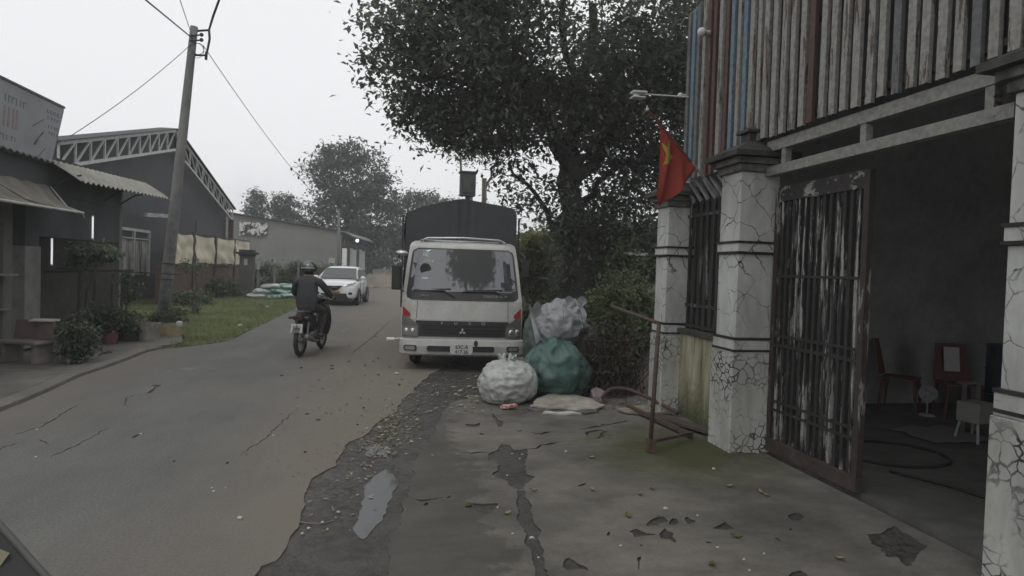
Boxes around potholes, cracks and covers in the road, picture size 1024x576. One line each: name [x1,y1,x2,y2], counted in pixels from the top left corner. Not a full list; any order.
pothole [867,526,927,565]
crack [0,405,108,456]
crack [584,421,627,438]
crack [516,490,548,576]
